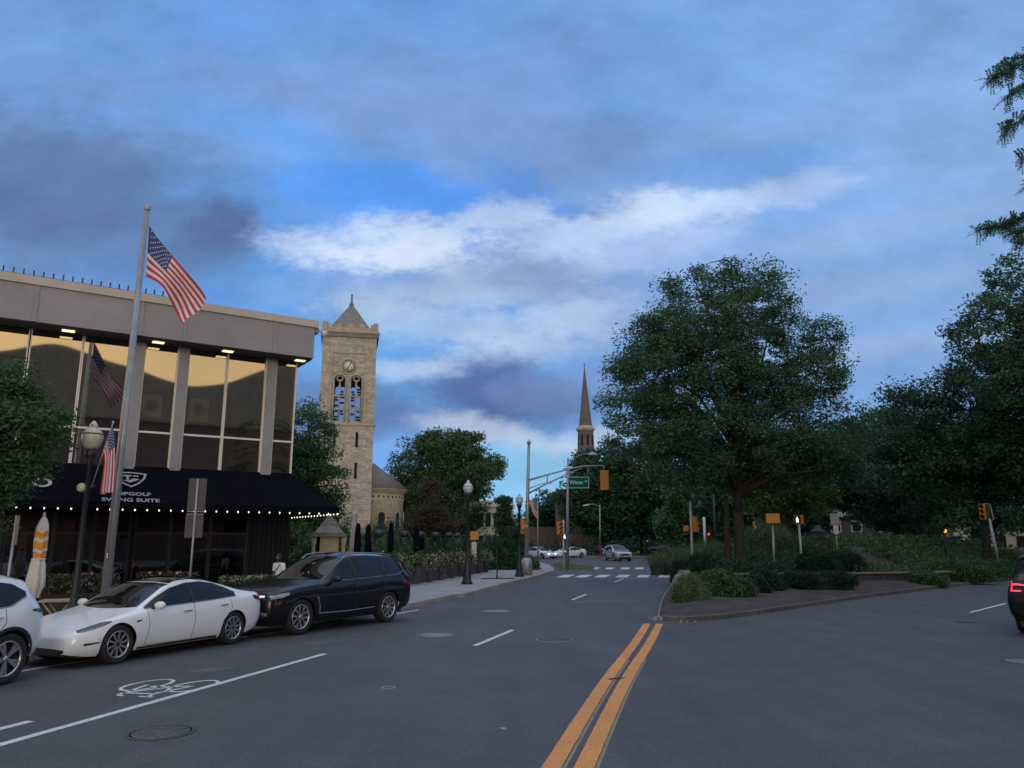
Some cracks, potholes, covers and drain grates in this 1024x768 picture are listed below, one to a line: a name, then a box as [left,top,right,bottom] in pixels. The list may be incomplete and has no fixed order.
manhole cover [125,725,196,741]
